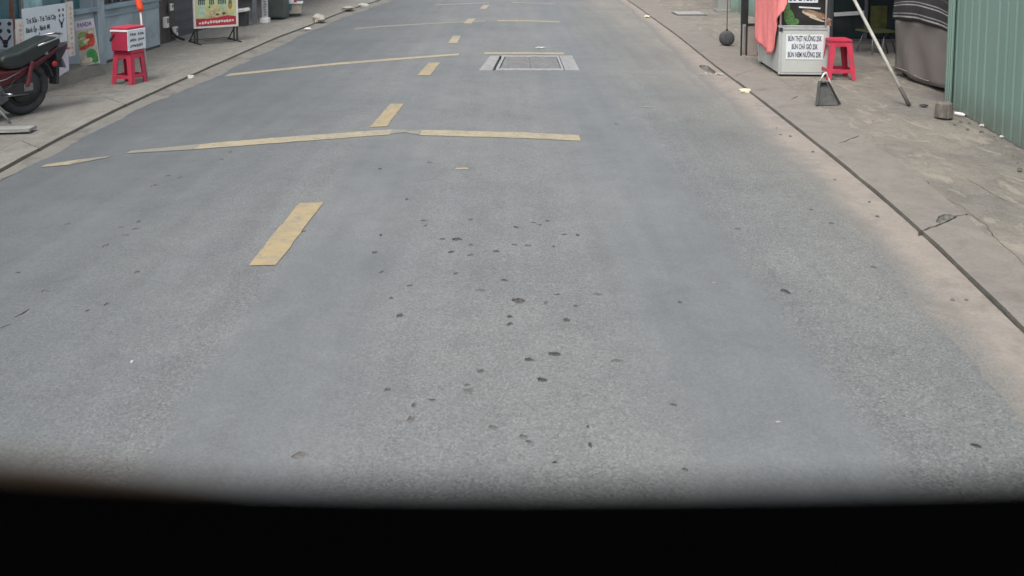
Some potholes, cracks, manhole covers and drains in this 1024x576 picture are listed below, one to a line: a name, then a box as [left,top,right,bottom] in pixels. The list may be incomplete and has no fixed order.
crack [928,182,1024,265]
manhole cover [479,55,579,70]
